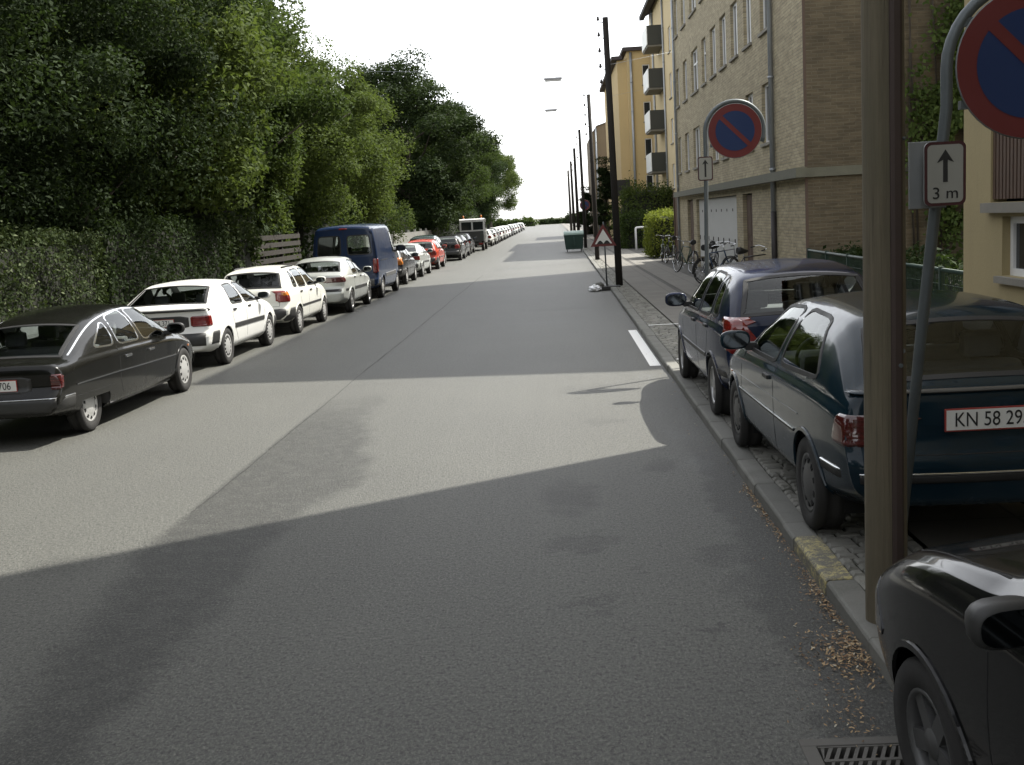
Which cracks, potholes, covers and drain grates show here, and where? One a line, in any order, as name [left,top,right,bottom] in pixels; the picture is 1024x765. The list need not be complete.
drain grate [798,736,904,765]
